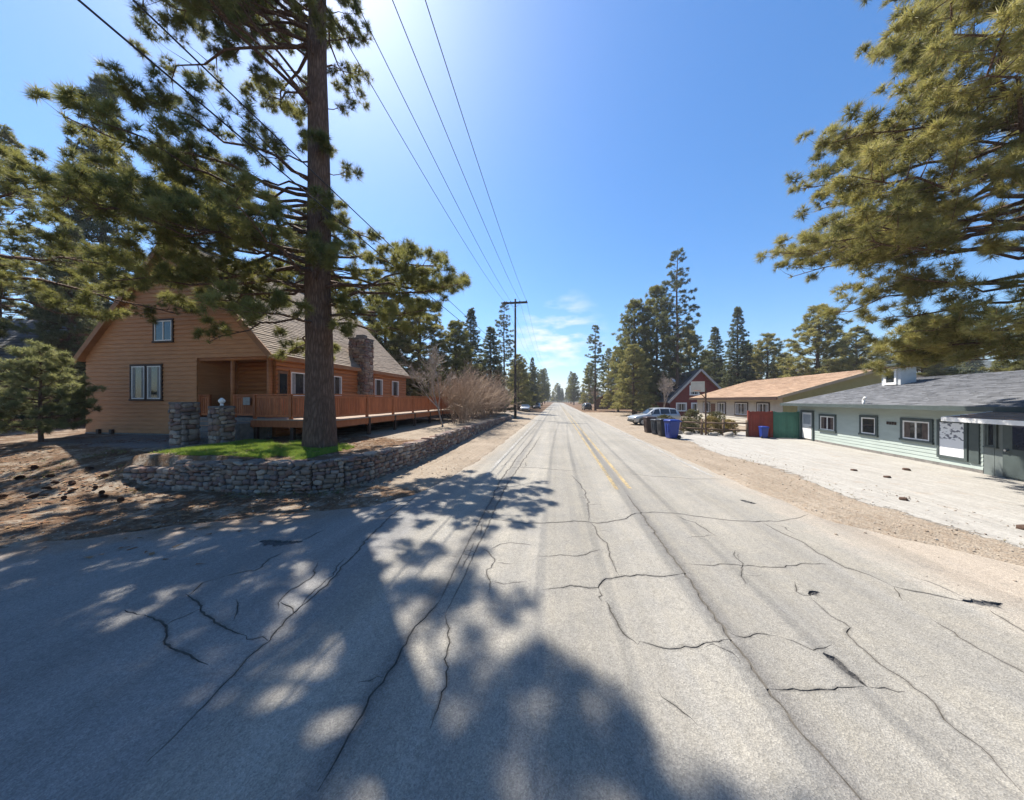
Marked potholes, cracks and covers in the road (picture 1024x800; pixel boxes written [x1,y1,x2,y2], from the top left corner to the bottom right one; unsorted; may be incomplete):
crack [125,438,1024,794]
pothole [823,652,867,687]
pothole [962,599,1003,608]
